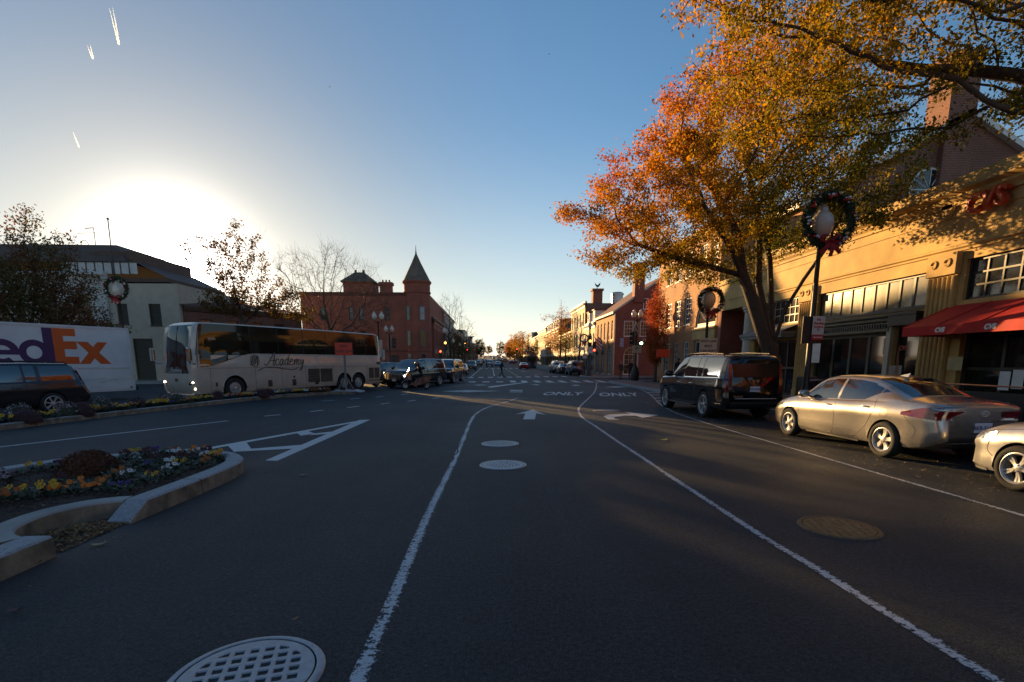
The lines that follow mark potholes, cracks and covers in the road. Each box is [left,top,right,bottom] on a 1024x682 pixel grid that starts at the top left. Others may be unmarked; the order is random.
manhole cover [797,516,884,540]
manhole cover [479,460,527,470]
